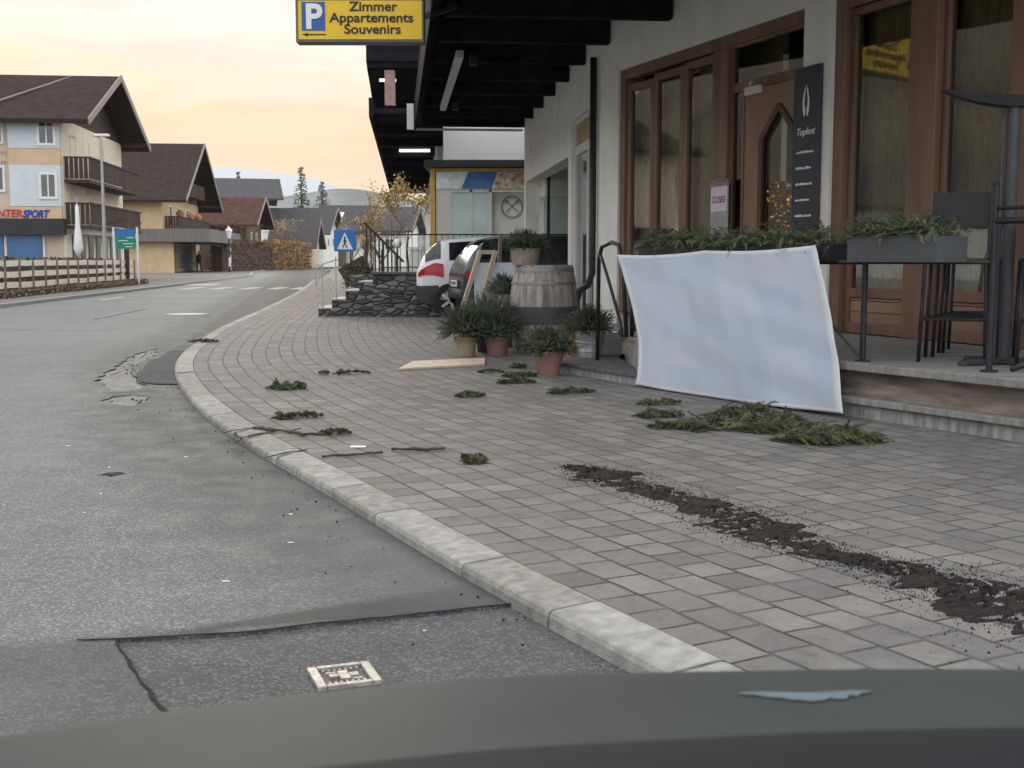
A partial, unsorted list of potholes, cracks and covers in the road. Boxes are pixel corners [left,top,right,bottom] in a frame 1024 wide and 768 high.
crack [76,603,511,712]
manhole cover [307,661,382,692]
pothole [101,394,153,406]
pothole [94,349,159,391]
